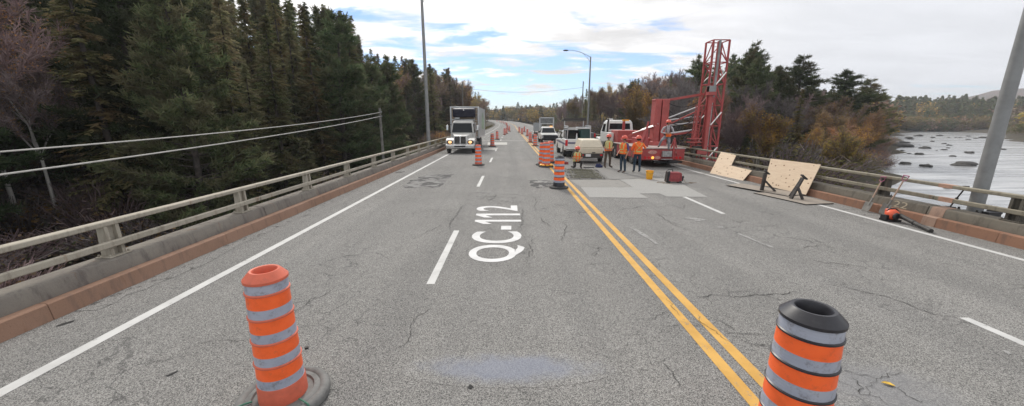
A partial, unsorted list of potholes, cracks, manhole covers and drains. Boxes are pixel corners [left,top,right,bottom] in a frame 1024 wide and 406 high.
crack [692,291,793,347]
crack [838,370,922,402]
